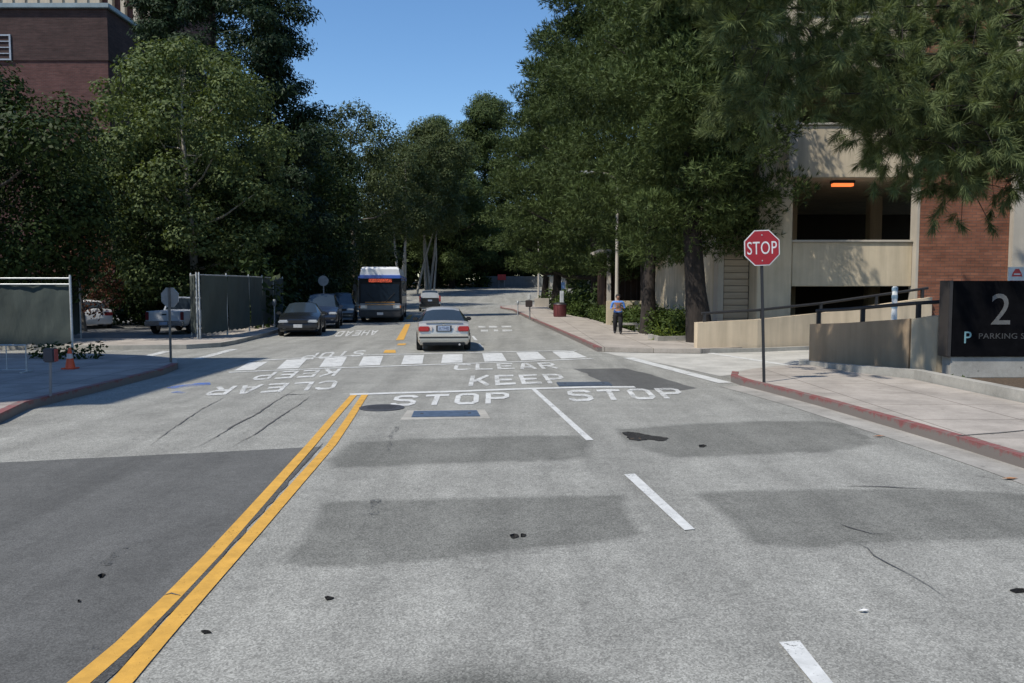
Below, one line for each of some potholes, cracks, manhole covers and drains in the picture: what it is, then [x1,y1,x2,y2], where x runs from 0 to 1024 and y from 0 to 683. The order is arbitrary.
pothole [622,432,667,441]
utility cover [400,409,490,420]
crack [839,523,945,597]
crack [153,393,308,446]
